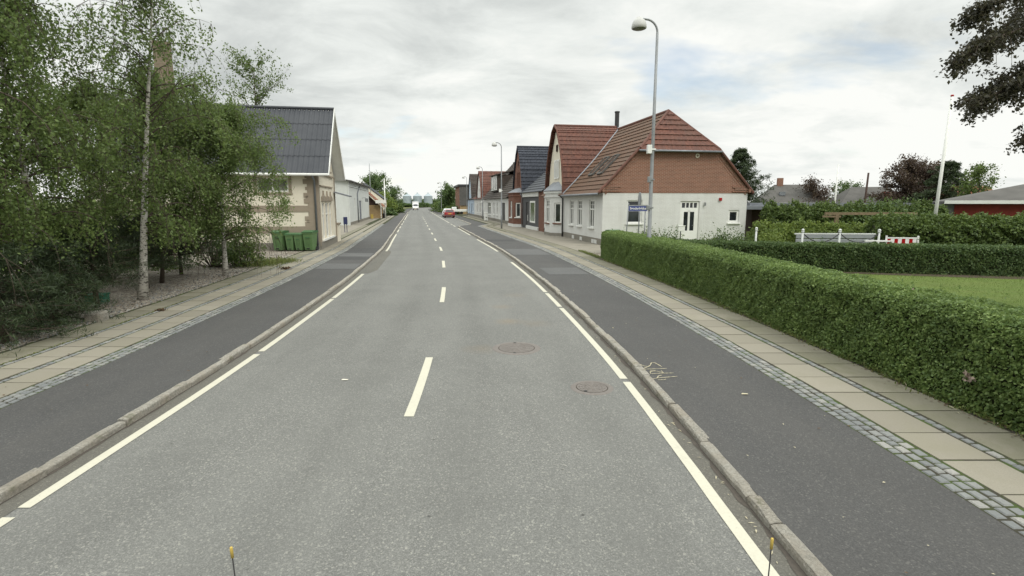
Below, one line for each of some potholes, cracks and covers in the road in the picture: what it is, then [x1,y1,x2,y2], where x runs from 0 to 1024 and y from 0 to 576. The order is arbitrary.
manhole cover [571,381,613,395]
manhole cover [492,342,541,355]
